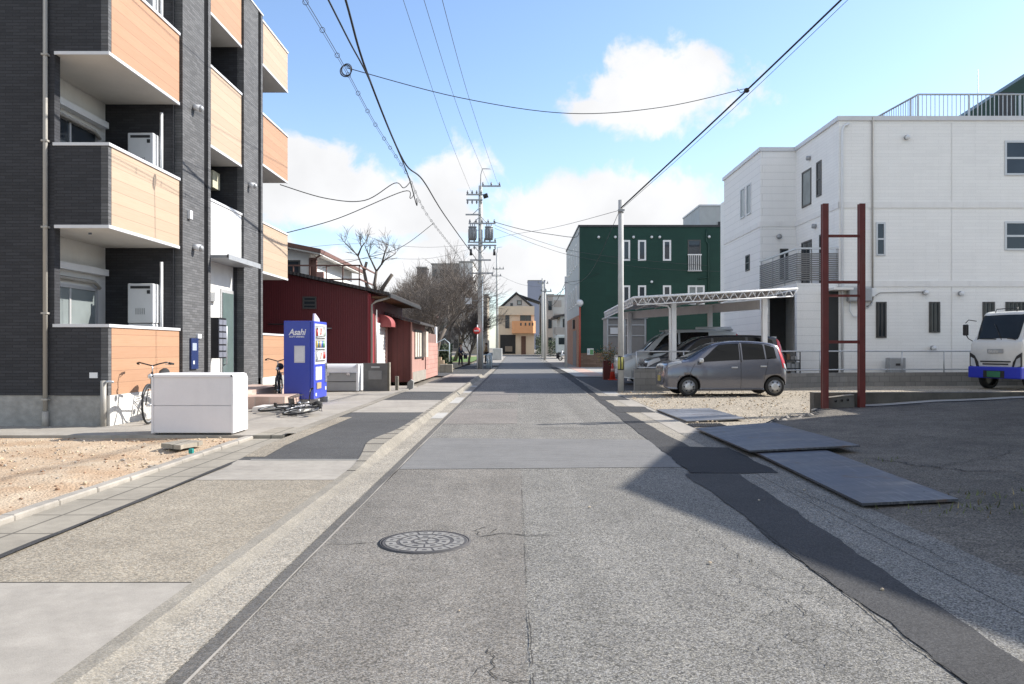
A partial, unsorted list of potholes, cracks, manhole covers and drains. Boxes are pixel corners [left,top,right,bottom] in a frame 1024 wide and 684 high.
manhole cover [378,531,471,554]
crack [473,608,534,684]
